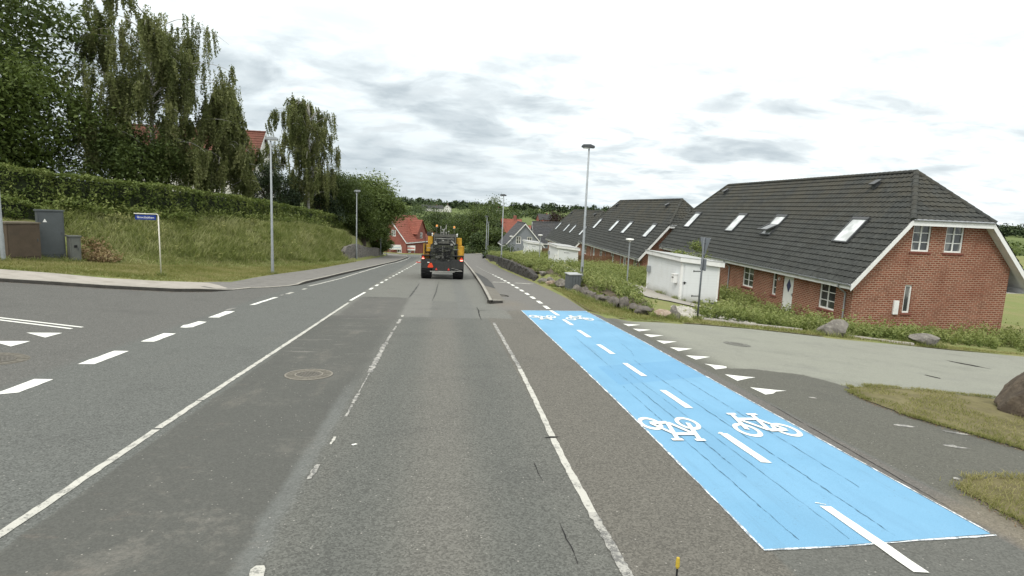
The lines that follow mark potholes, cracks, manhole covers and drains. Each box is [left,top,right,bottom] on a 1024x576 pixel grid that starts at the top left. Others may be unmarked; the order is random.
manhole cover [284,369,333,380]
crack [534,463,578,564]
